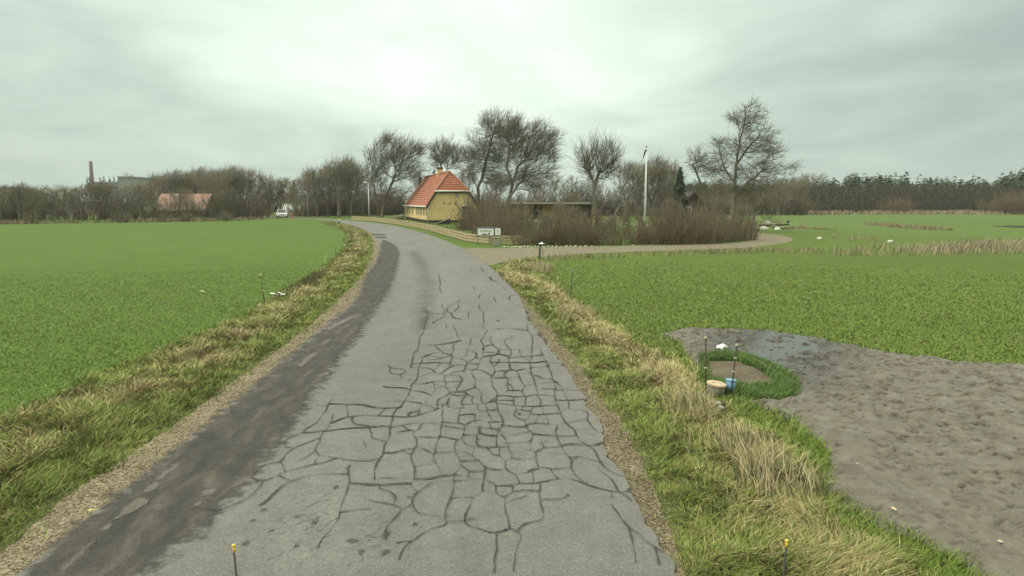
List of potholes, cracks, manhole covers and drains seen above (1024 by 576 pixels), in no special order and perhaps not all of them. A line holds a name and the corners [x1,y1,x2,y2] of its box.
crack [203,268,665,572]
